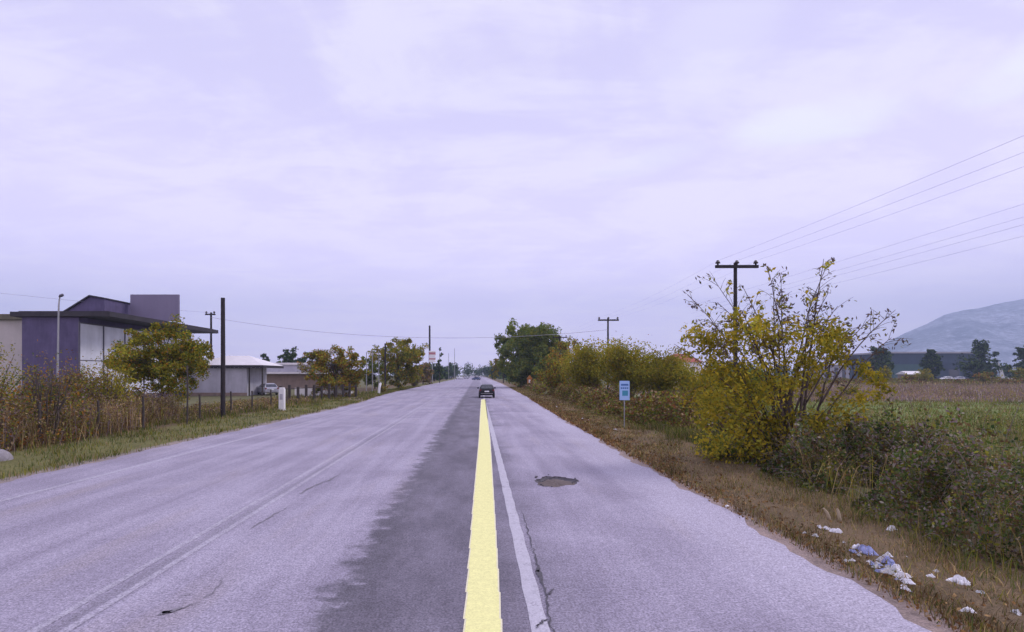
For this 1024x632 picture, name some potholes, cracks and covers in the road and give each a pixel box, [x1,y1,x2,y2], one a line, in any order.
pothole [534,474,579,487]
crack [521,511,555,632]
crack [158,579,222,615]
